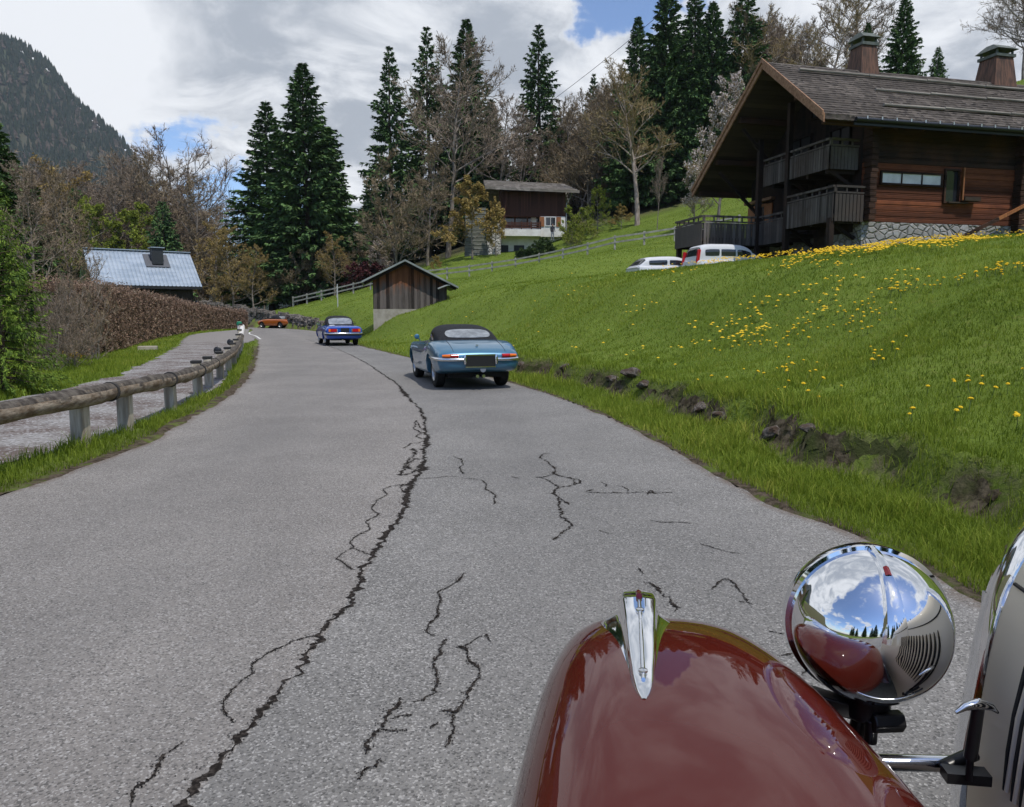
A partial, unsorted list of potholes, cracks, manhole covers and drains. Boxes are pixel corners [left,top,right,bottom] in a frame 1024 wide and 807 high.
crack [126,741,184,807]
crack [639,568,681,612]
crack [421,456,517,504]
crack [356,572,491,779]
crack [712,578,752,604]
crack [538,453,672,540]
